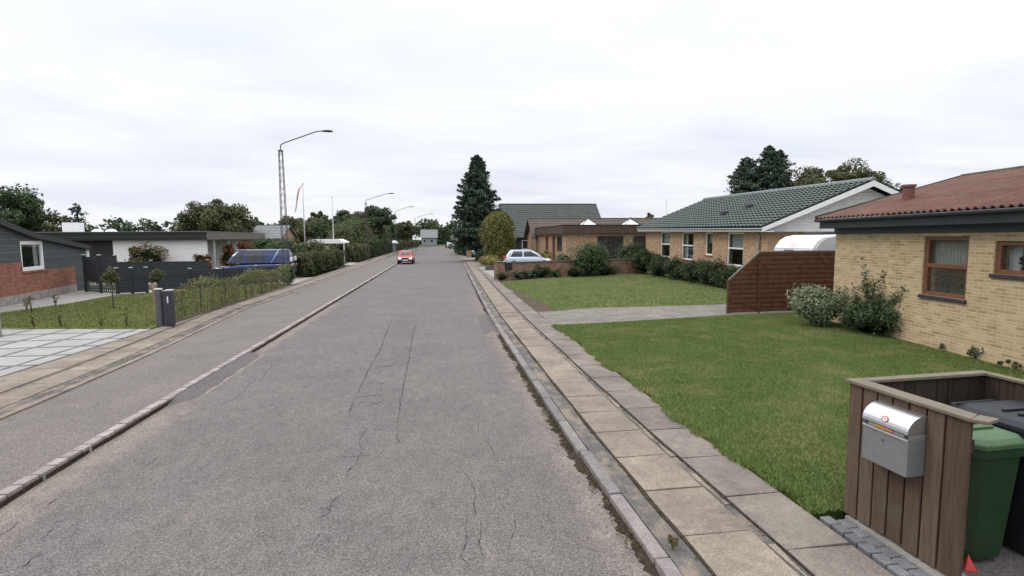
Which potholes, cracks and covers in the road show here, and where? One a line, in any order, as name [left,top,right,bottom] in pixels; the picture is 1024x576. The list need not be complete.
crack [452,469,483,565]
